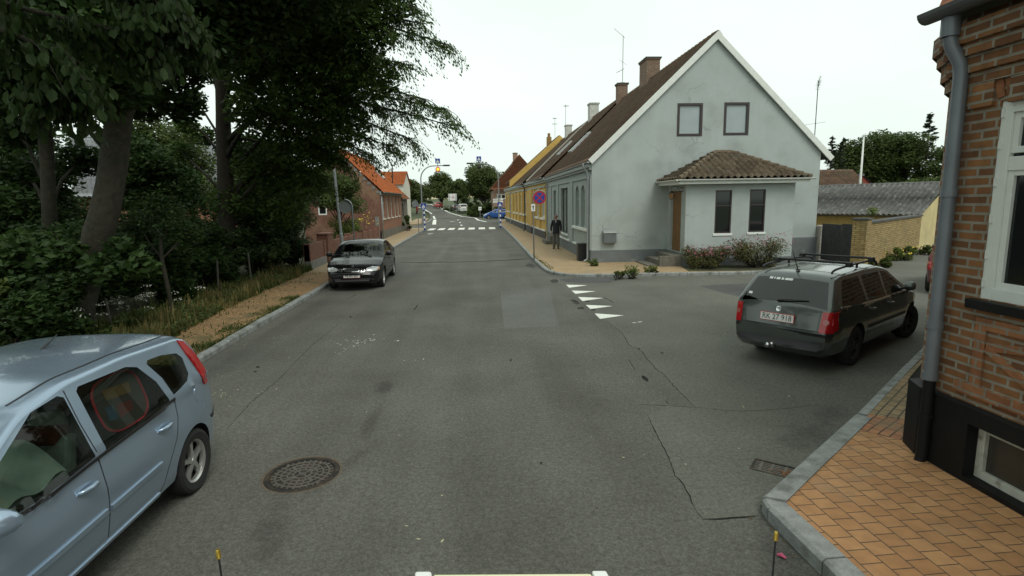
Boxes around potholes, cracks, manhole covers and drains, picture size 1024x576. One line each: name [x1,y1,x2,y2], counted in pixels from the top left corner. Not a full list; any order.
drain grate [749,458,796,478]
manhole cover [260,456,343,494]
